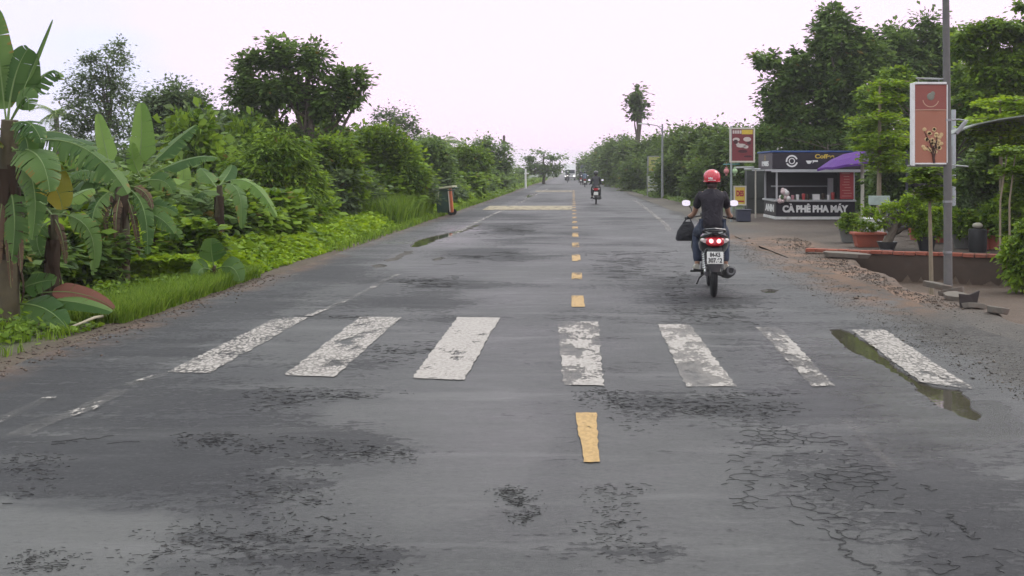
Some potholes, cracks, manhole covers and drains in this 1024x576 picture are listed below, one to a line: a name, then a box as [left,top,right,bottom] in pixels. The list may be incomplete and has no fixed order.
crack [900,484,1024,574]
crack [831,537,882,574]
pothole [829,329,982,421]
pothole [410,223,482,247]
